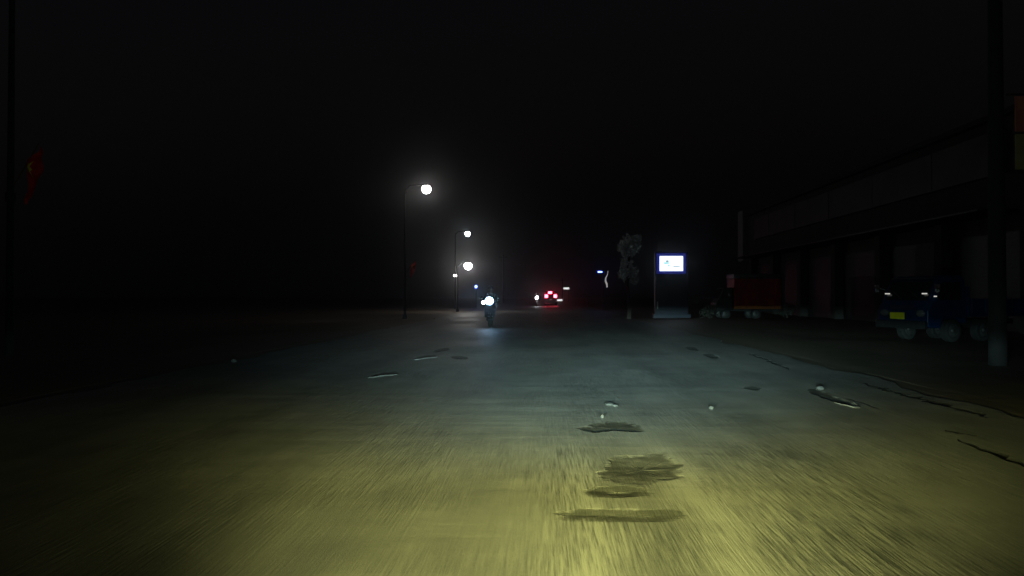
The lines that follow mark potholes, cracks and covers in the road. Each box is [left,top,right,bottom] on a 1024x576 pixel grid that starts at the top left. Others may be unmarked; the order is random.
pothole [548,508,690,523]
pothole [807,388,860,408]
pothole [580,484,657,499]
crack [751,354,789,370]
pothole [591,452,687,487]
crack [846,382,1024,467]
pothole [575,421,647,433]
